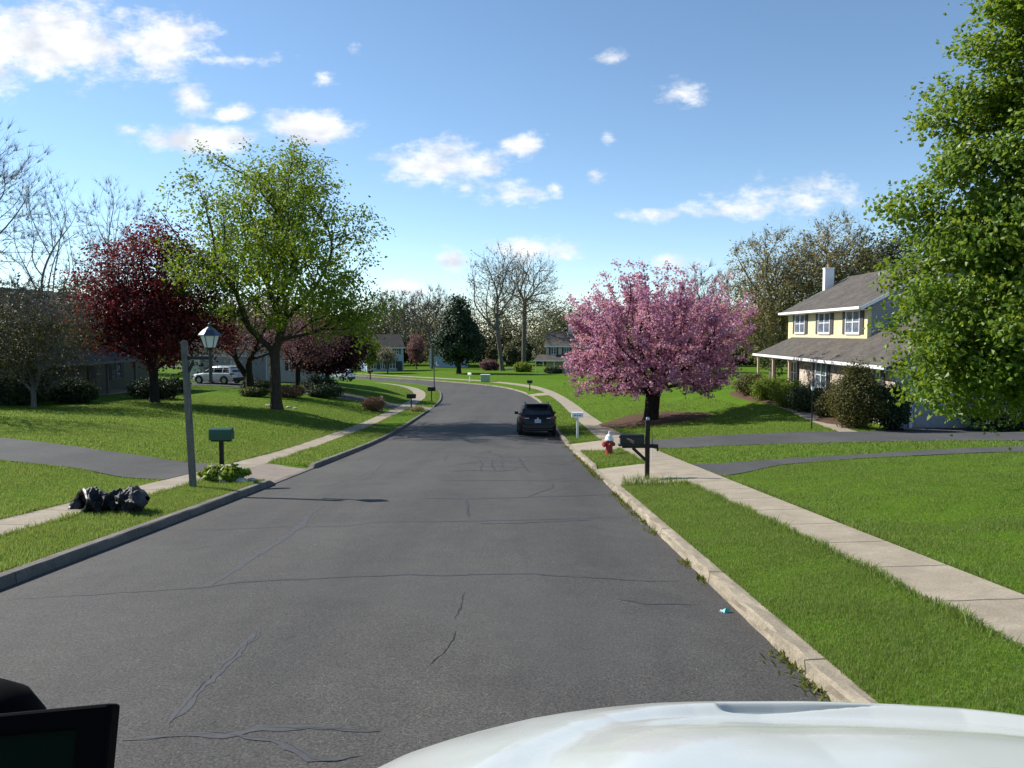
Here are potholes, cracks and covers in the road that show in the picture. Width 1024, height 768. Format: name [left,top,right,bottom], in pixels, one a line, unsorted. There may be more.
crack [429,594,464,665]
crack [428,461,623,524]
crack [195,505,325,585]
